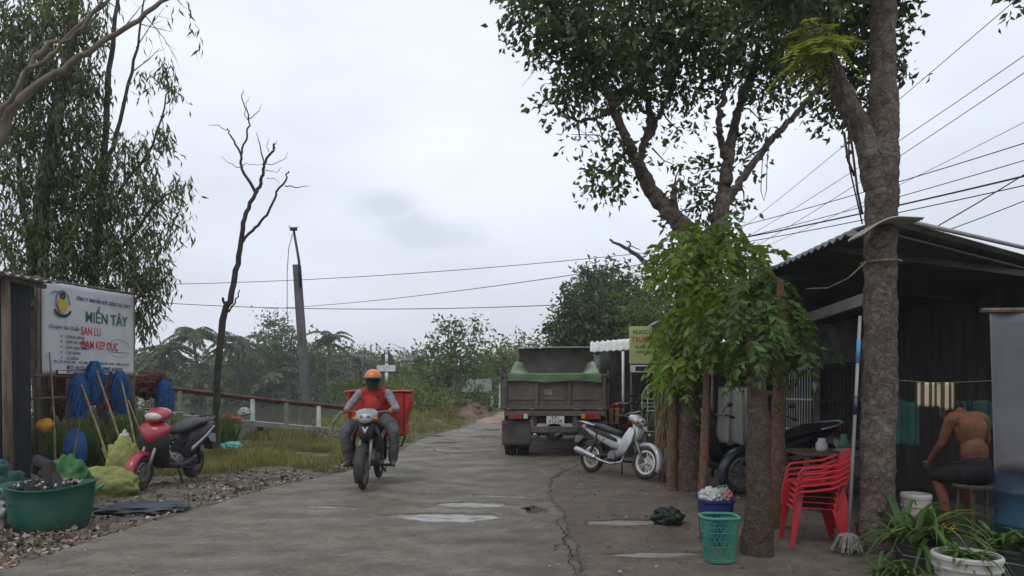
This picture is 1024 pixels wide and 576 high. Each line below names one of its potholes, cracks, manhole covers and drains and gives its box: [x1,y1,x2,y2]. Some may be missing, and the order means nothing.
pothole [512,504,560,516]
crack [553,518,578,576]
